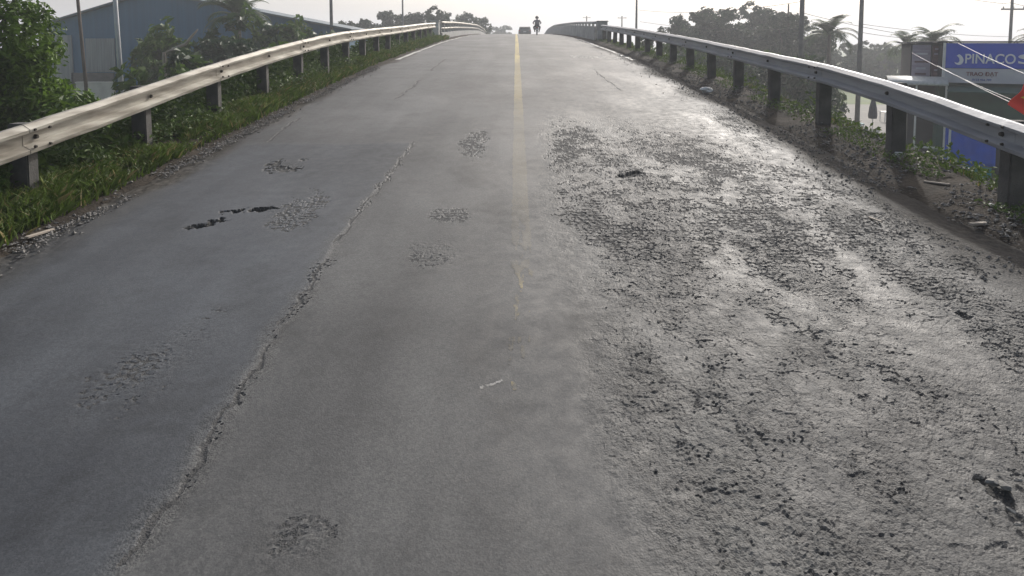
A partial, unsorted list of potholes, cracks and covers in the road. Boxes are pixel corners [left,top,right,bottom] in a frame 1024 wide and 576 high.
crack [605,286,1024,576]
pothole [973,474,1024,527]
crack [395,59,445,99]
pothole [183,217,226,230]
crack [263,118,330,232]
crack [544,110,979,298]
